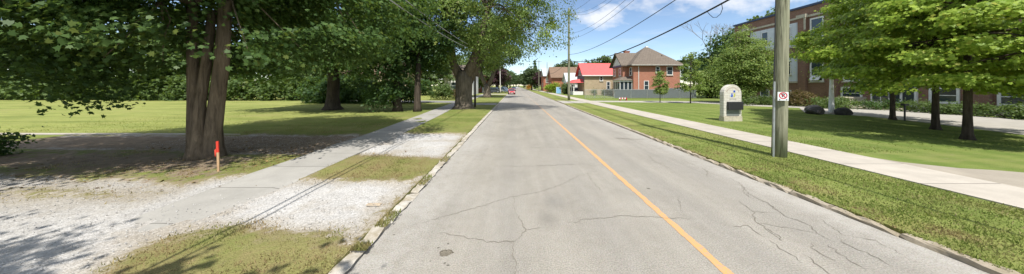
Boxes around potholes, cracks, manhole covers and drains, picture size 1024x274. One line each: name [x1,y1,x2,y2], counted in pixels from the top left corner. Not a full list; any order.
crack [413,164,600,274]
